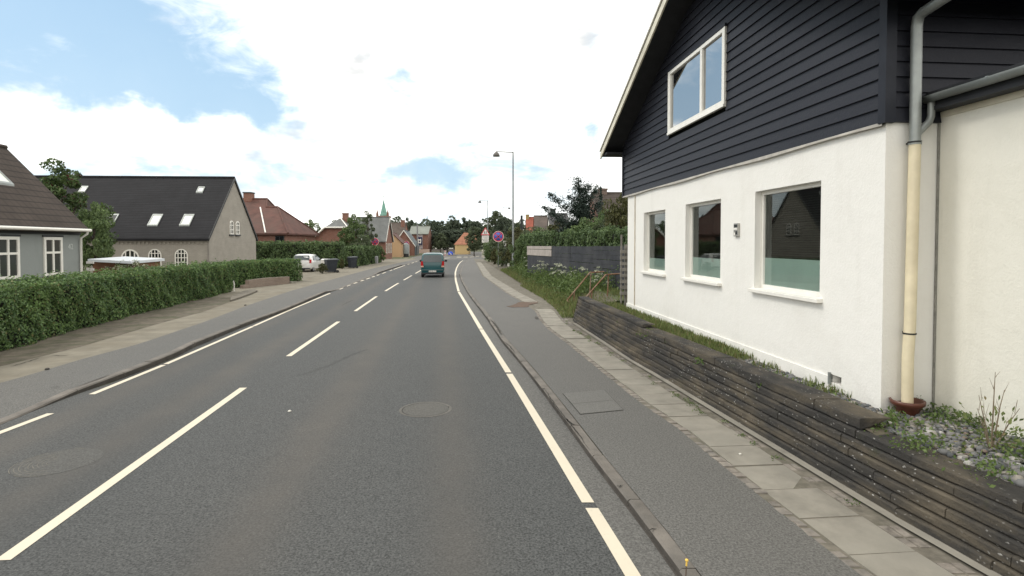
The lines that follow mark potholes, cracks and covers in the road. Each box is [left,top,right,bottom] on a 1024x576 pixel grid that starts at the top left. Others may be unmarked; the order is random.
manhole cover [399,402,452,417]
manhole cover [562,390,623,414]
manhole cover [8,447,104,477]
